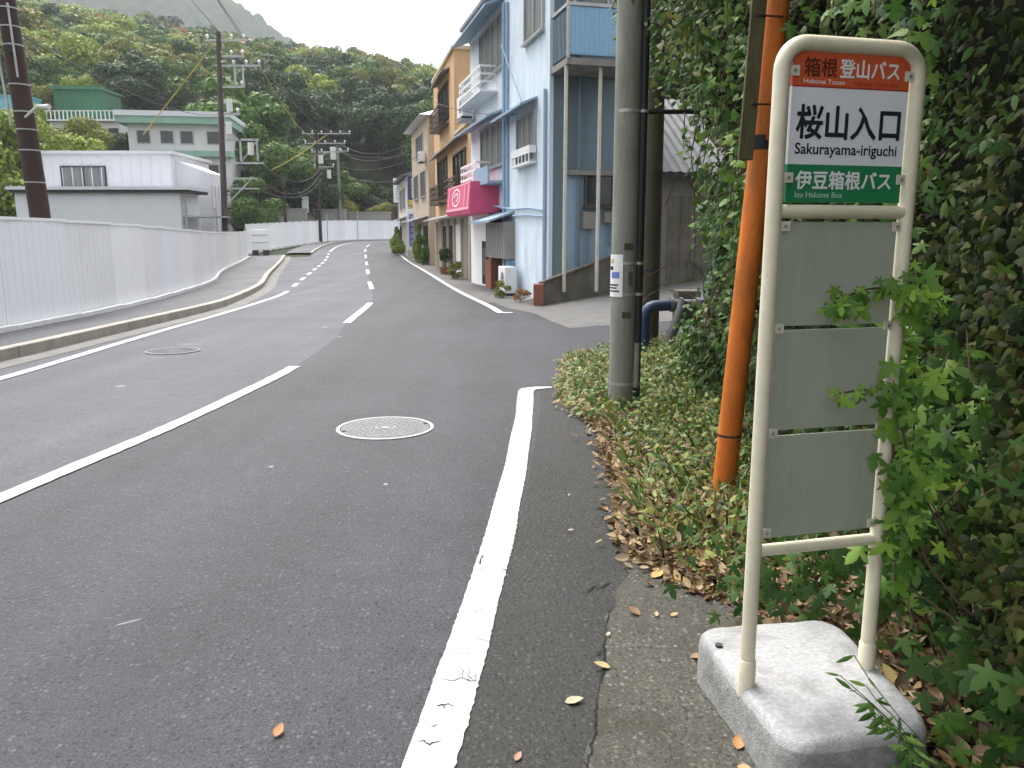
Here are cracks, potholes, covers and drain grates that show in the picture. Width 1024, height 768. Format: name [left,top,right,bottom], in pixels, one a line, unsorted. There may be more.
crack [586,583,615,766]
crack [436,639,486,681]
manhole cover [145,347,201,355]
manhole cover [336,417,434,440]
